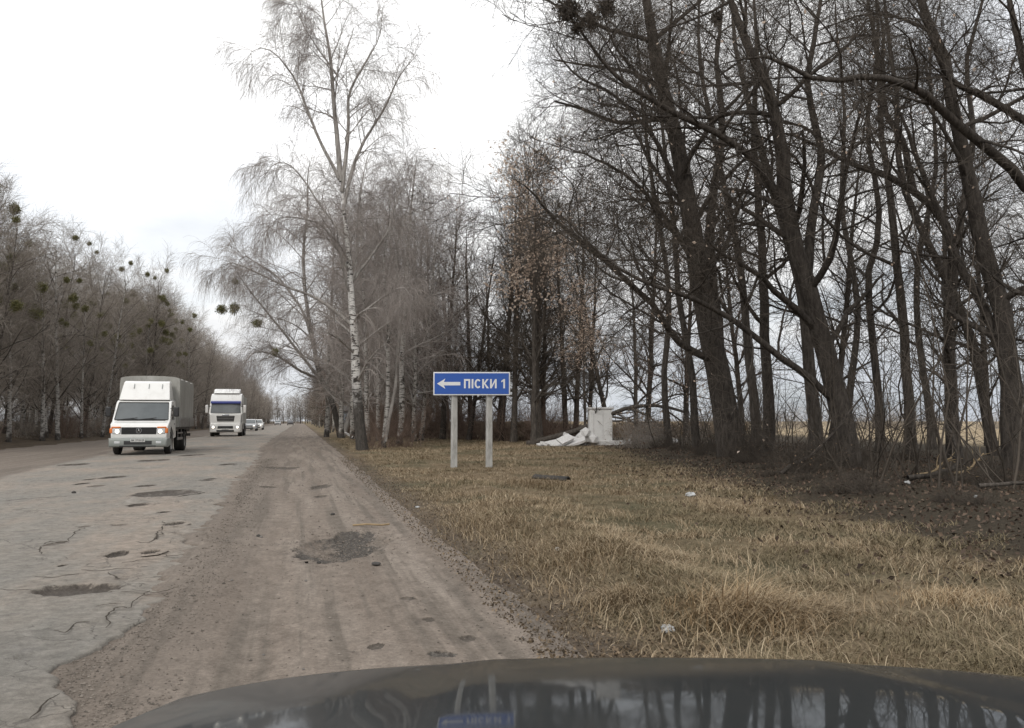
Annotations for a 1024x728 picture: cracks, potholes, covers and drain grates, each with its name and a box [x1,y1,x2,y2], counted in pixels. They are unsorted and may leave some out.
pothole [98,550,135,559]
pothole [282,529,401,566]
pothole [19,583,134,598]
crack [30,693,60,718]
pothole [356,640,395,654]
pothole [127,489,204,498]
crack [4,521,184,627]
